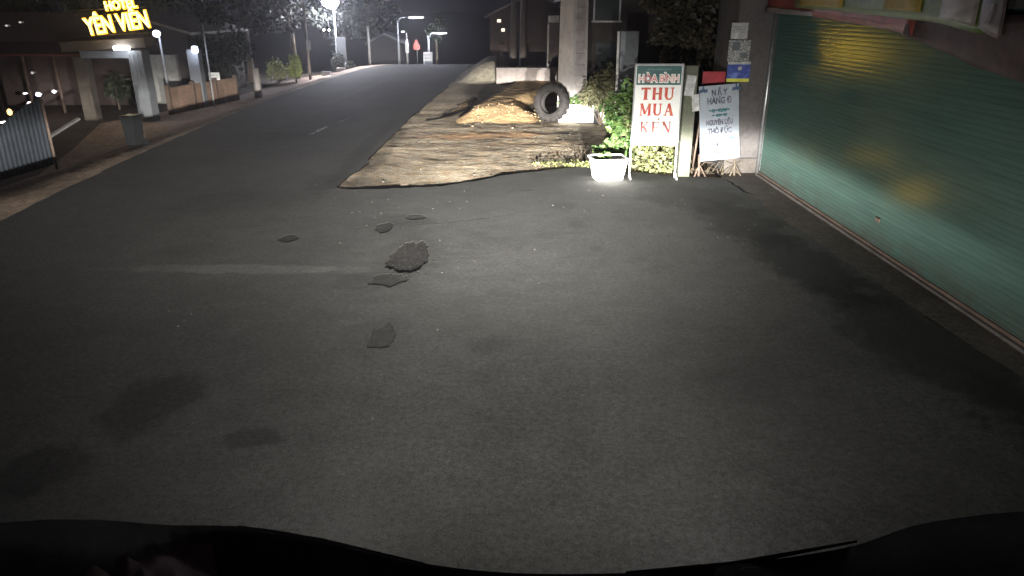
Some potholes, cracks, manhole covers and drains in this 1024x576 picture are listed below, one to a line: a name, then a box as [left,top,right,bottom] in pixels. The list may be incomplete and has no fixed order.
pothole [277,234,301,243]
pothole [368,273,409,288]
pothole [365,320,397,349]
pothole [378,239,435,279]
pothole [373,222,396,234]
